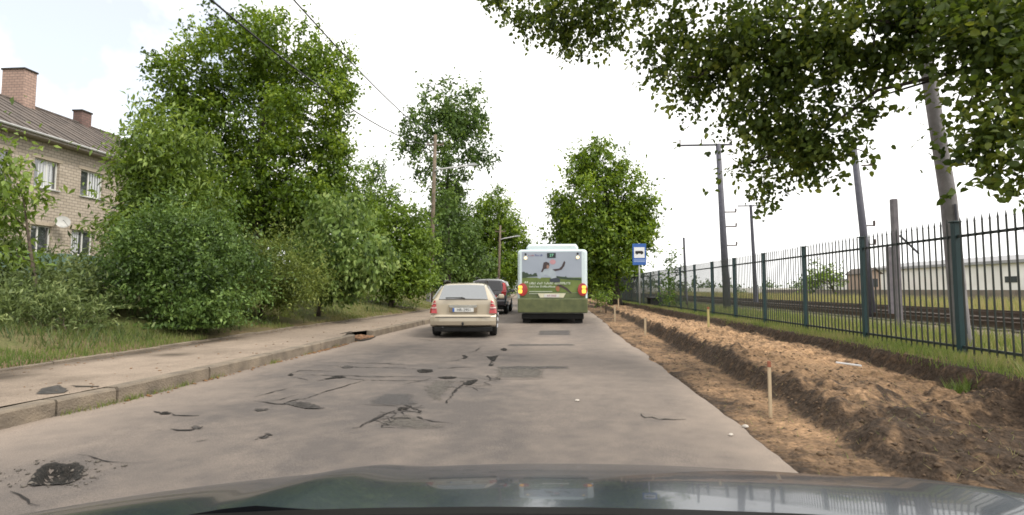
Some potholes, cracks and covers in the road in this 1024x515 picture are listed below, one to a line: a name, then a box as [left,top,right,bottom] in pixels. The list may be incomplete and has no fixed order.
crack [256,362,425,404]
crack [446,343,518,403]
crack [354,403,454,428]
crack [154,411,203,441]
pothole [36,385,67,394]
pothole [29,462,84,486]
